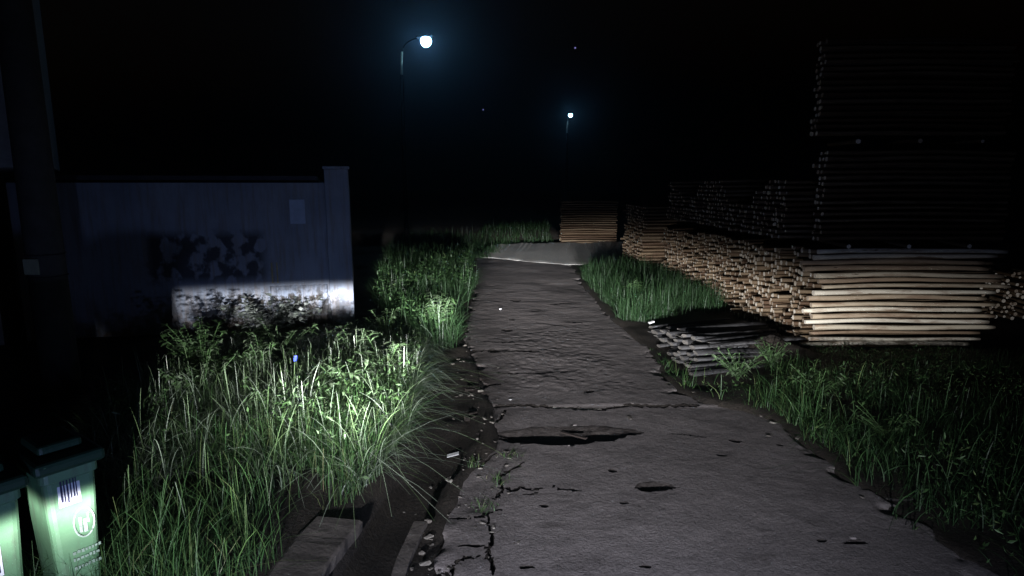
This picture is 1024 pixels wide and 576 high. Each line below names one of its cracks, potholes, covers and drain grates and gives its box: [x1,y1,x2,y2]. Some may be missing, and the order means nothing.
crack [445,454,581,576]
pothole [634,481,676,492]
pothole [476,425,644,445]
